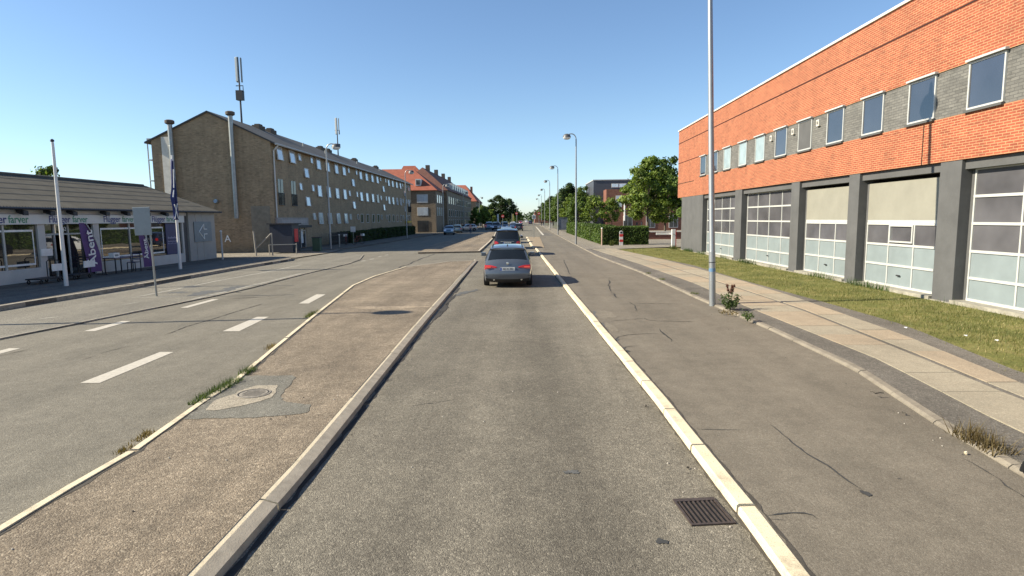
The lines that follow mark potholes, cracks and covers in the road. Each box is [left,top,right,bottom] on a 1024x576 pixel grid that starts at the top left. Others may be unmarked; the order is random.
crack [607,281,684,348]
manhole cover [236,388,271,398]
crack [965,459,1024,497]
drain grate [673,497,736,526]
crack [770,424,872,496]
